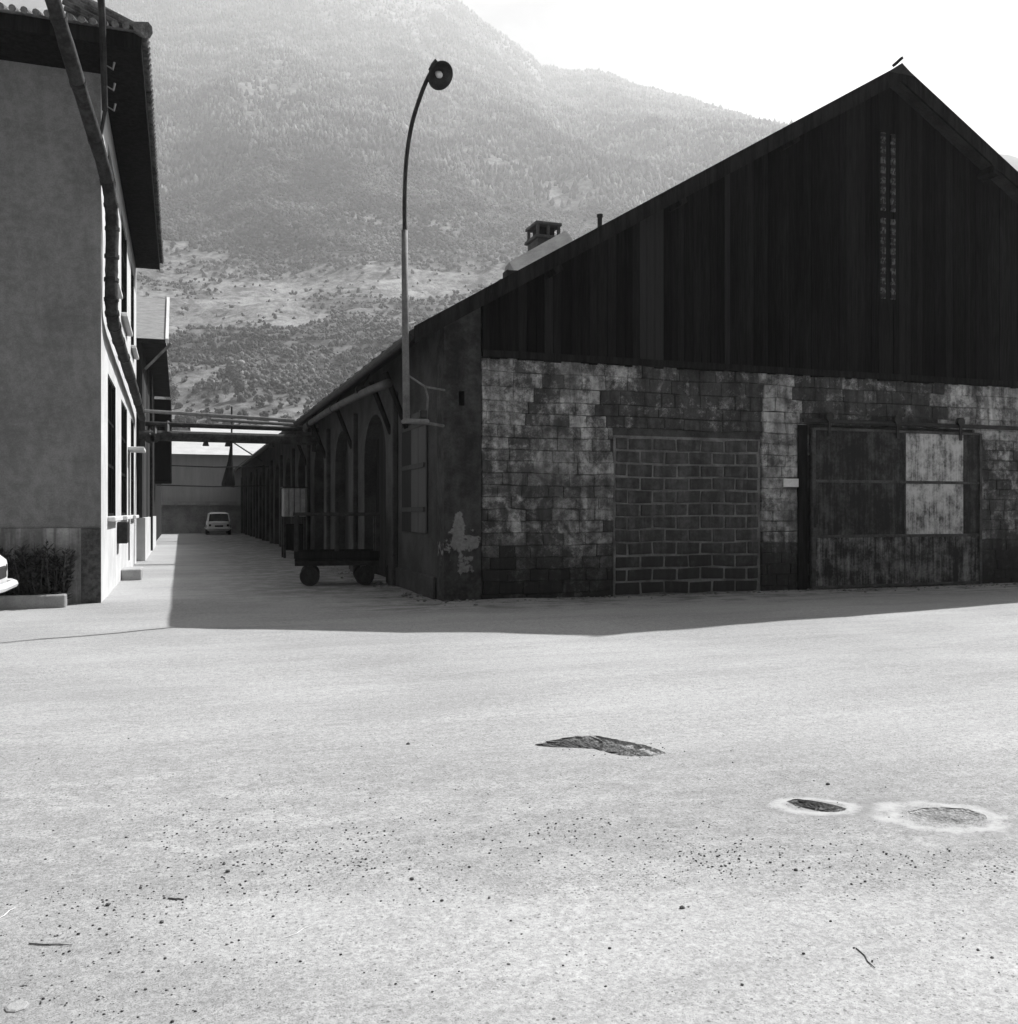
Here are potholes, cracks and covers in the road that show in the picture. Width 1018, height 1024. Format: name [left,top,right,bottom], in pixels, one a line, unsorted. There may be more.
pothole [787,799,846,812]
pothole [535,736,665,756]
pothole [907,807,987,824]
